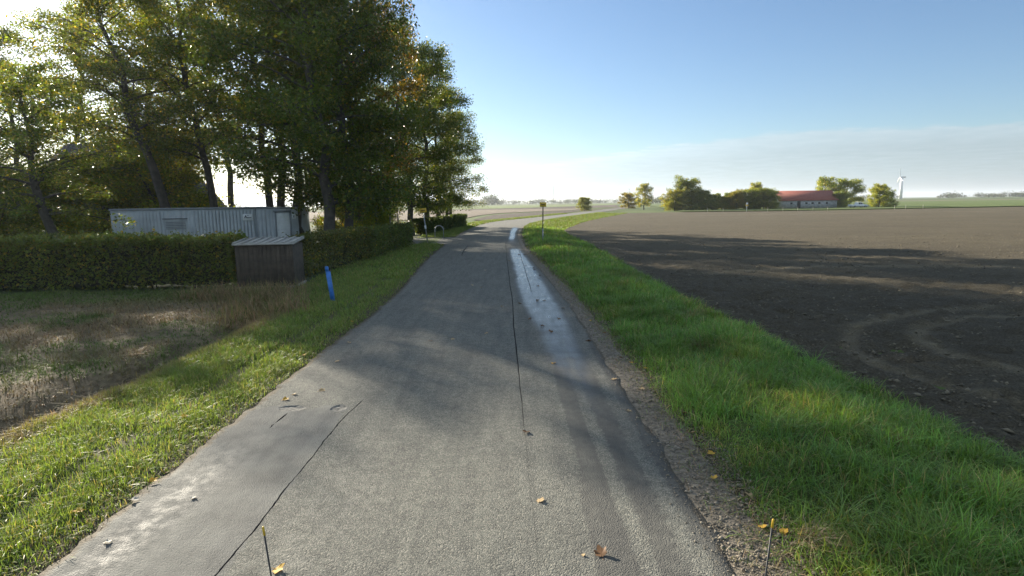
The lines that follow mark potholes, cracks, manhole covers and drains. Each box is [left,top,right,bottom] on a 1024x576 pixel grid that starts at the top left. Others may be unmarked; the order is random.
crack [214,399,364,576]
